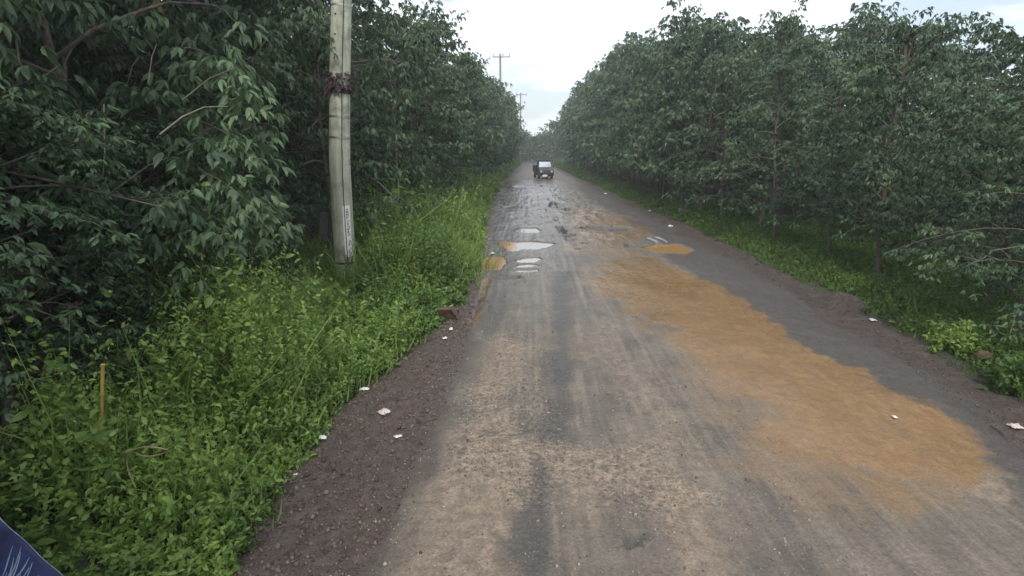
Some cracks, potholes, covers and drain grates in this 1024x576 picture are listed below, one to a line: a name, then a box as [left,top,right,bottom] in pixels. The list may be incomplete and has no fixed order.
pothole [618,529,652,550]
pothole [554,226,576,242]
